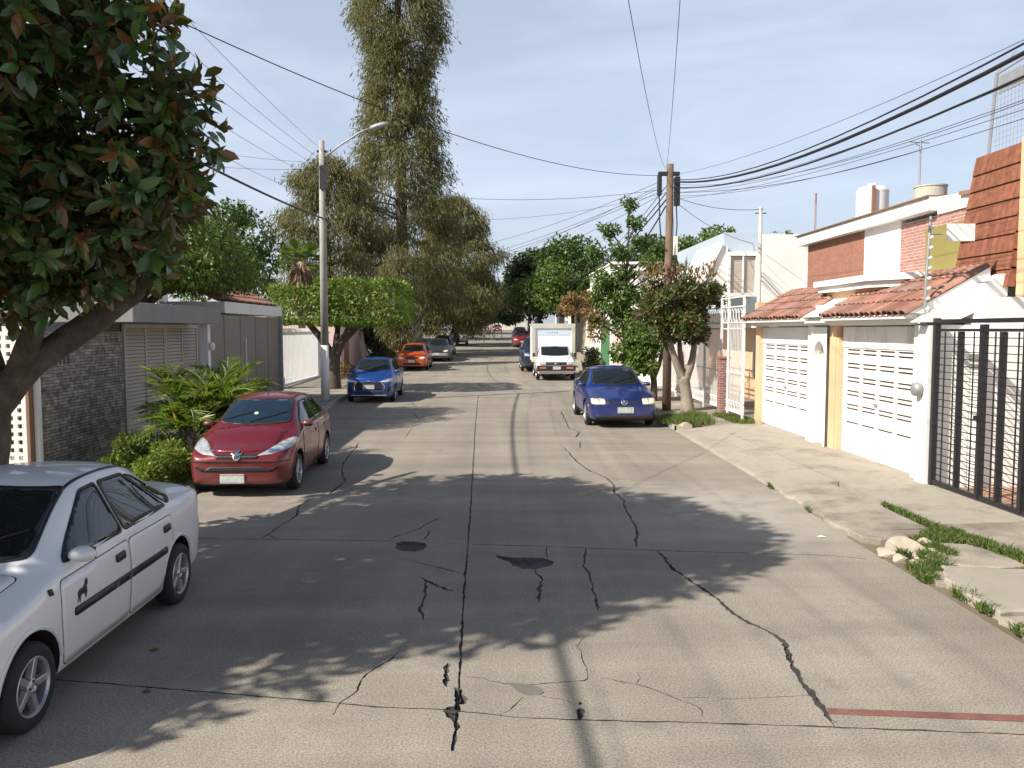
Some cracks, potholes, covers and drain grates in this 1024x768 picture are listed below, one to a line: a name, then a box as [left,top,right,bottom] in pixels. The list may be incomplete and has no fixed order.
pothole [442,663,450,687]
pothole [496,555,554,569]
crack [333,651,399,715]
pothole [444,687,468,732]
crack [561,412,639,611]
crack [262,443,359,538]
crack [413,561,466,620]
crack [473,552,835,728]
pothole [395,541,427,552]
